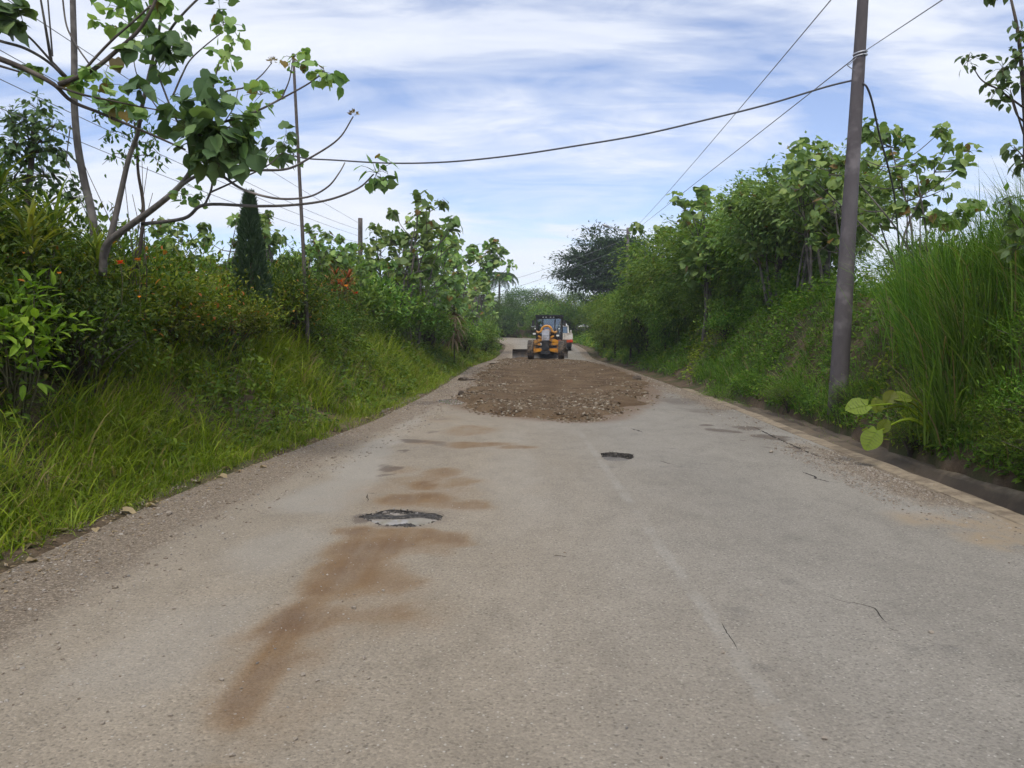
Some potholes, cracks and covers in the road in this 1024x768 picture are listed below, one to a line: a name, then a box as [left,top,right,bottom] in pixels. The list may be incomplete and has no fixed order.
pothole [355,508,443,528]
pothole [601,451,634,461]
crack [757,428,852,482]
